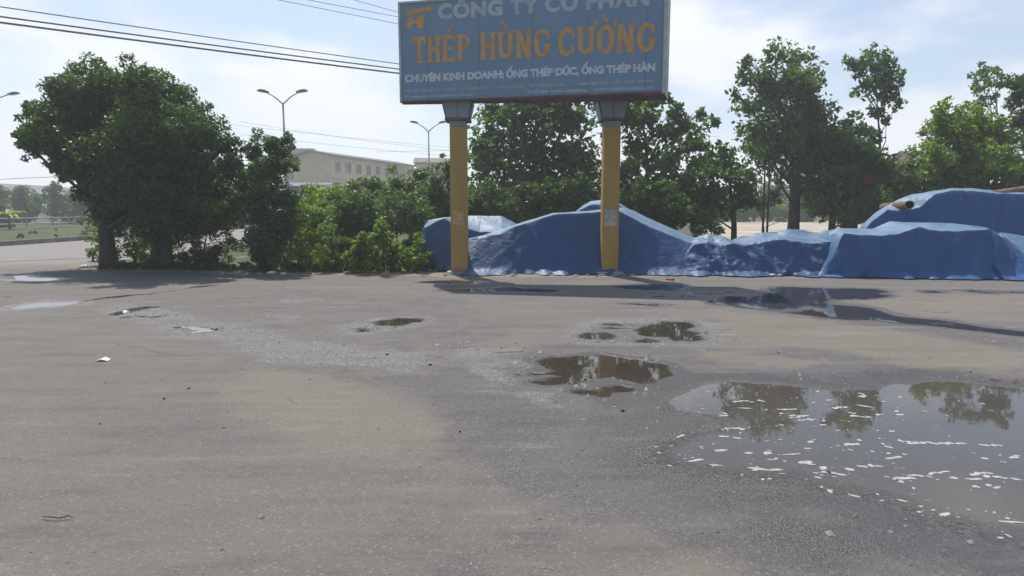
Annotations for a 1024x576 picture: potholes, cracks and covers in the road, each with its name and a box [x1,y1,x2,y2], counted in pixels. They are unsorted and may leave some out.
pothole [512,354,675,386]
pothole [108,306,160,316]
pothole [578,332,622,340]
pothole [370,318,425,326]
pothole [569,384,637,397]
pothole [633,321,706,342]
